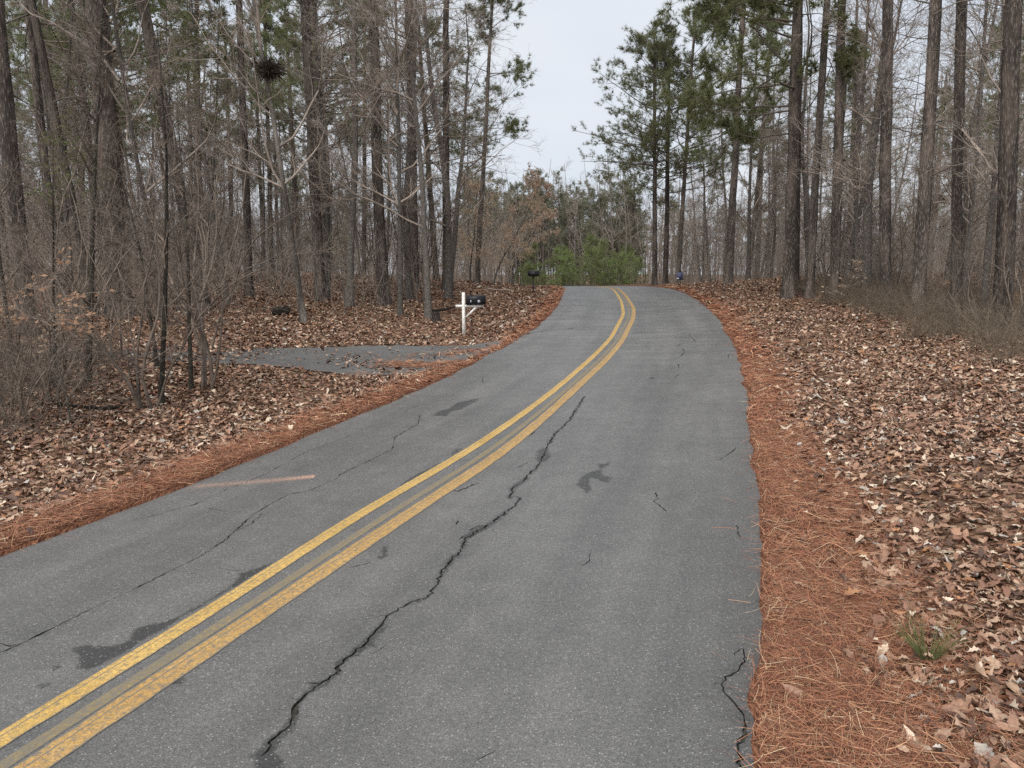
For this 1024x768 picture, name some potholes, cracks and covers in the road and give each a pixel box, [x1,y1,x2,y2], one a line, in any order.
crack [721,648,748,768]
crack [0,417,420,653]
crack [261,396,585,756]
